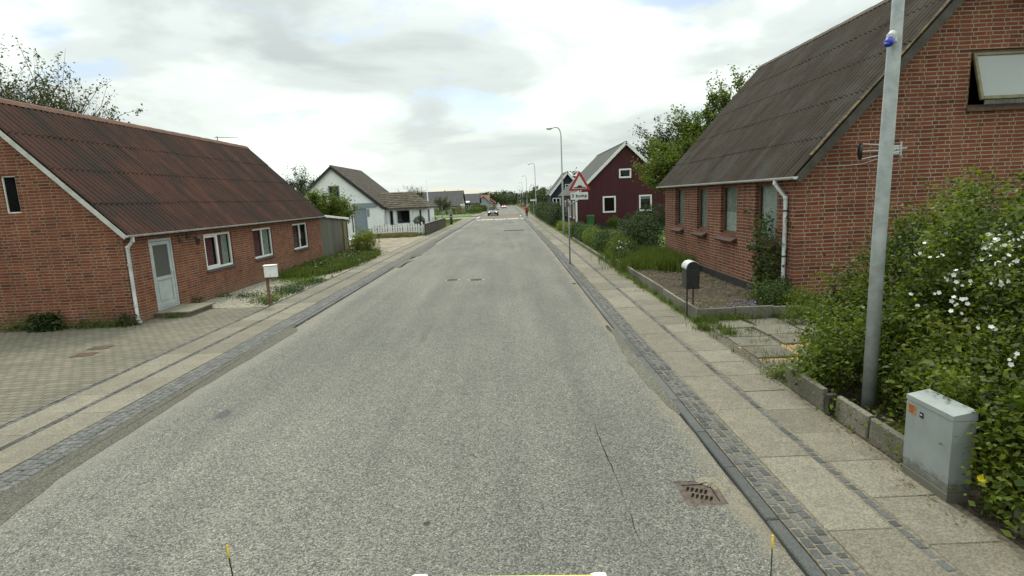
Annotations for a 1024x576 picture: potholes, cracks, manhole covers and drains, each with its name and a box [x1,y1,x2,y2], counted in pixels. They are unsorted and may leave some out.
drain grate [674,477,729,506]
crack [593,420,641,542]
